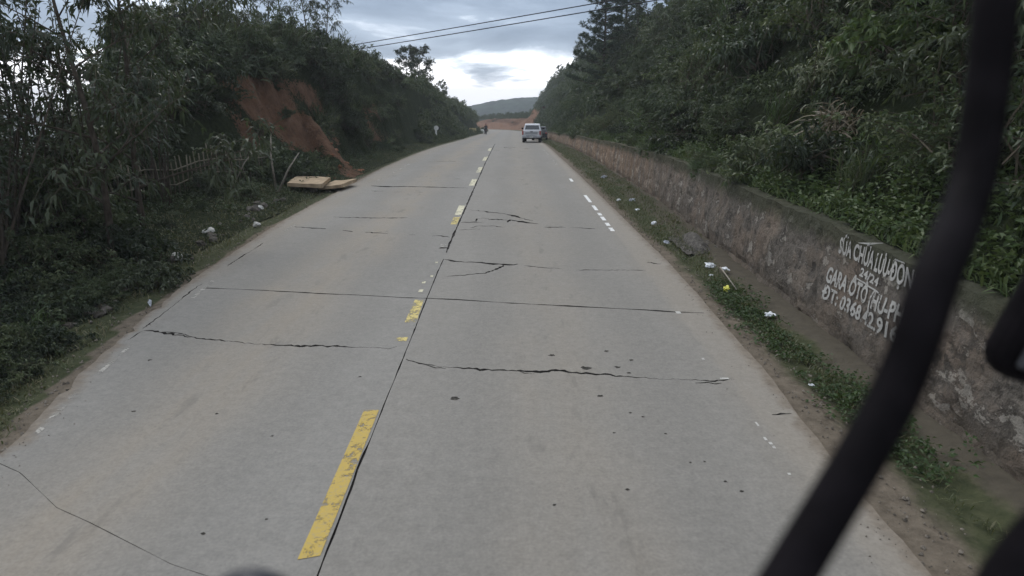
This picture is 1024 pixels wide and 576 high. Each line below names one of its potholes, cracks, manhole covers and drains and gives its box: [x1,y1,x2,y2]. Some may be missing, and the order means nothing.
crack [128,244,729,384]
crack [465,210,592,230]
